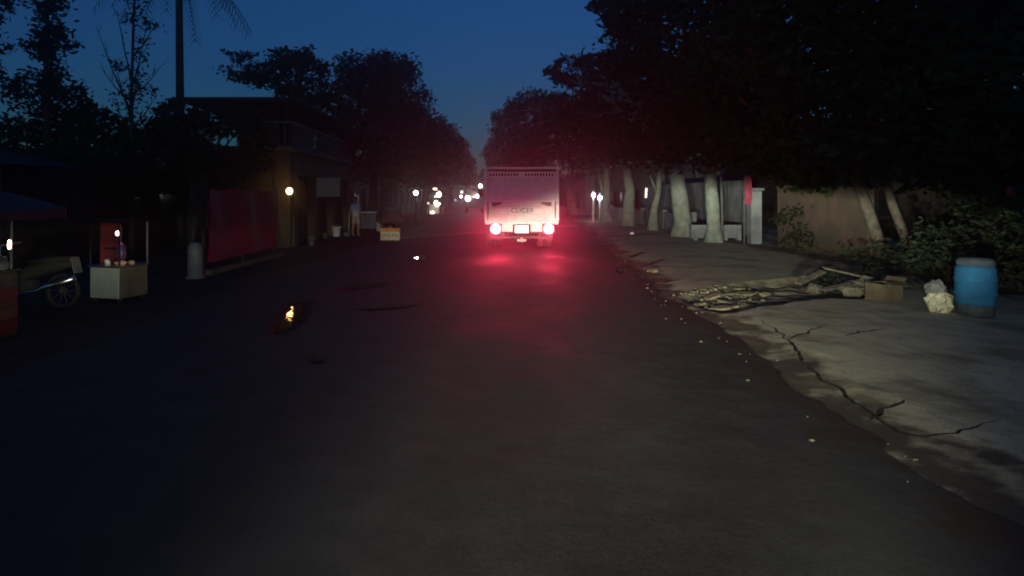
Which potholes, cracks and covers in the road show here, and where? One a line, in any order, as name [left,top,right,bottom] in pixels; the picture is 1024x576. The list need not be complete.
pothole [265,298,315,335]
pothole [306,355,329,364]
crack [760,319,1002,437]
